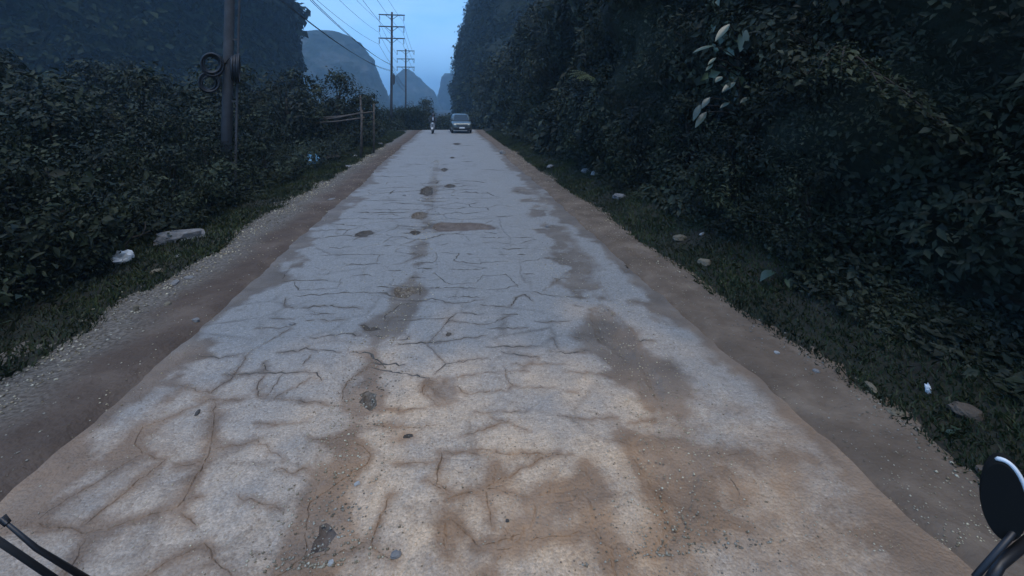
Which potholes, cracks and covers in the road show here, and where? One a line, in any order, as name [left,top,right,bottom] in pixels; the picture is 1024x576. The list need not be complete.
pothole [394,286,423,298]
crack [31,145,619,576]
pothole [310,523,337,553]
pothole [359,391,377,411]
